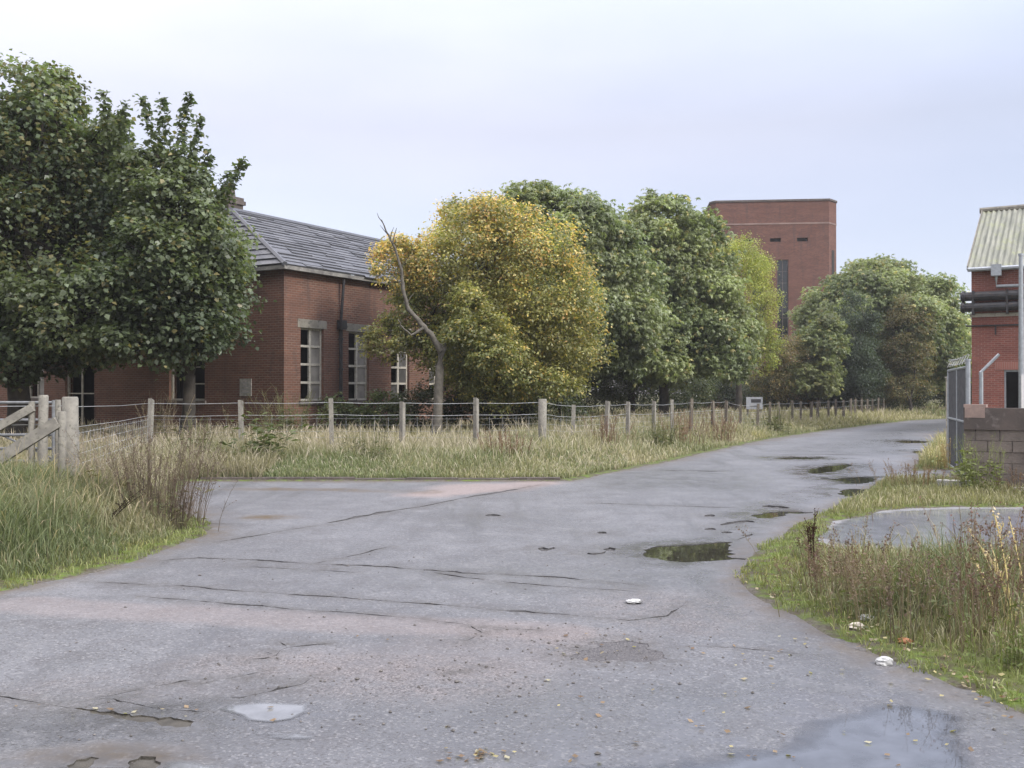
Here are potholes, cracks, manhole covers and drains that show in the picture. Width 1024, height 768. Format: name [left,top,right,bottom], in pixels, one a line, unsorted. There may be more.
pothole [67,757,99,768]
pothole [128,756,161,768]
pothole [643,542,745,562]
crack [161,547,634,591]
pothole [75,708,194,727]
pothole [806,464,852,474]
crack [109,680,199,712]
crack [103,582,682,640]
